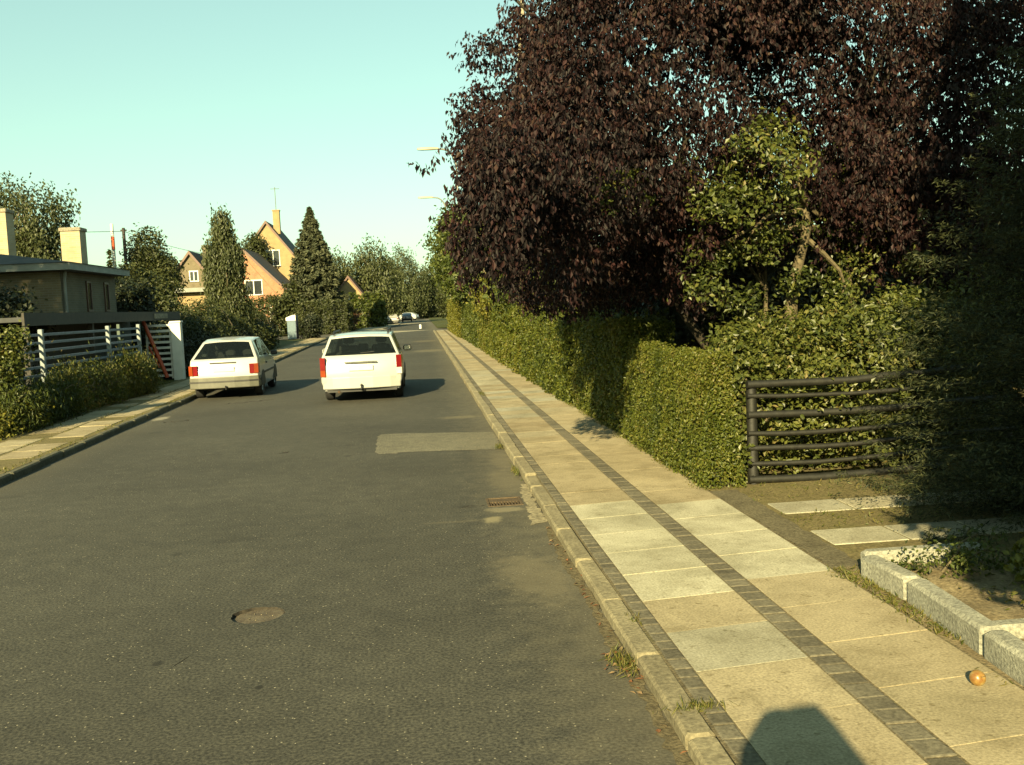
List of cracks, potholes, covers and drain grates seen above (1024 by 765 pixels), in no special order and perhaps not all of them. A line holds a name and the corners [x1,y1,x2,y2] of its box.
drain grate [485,496,524,507]
manhole cover [231,607,285,624]
